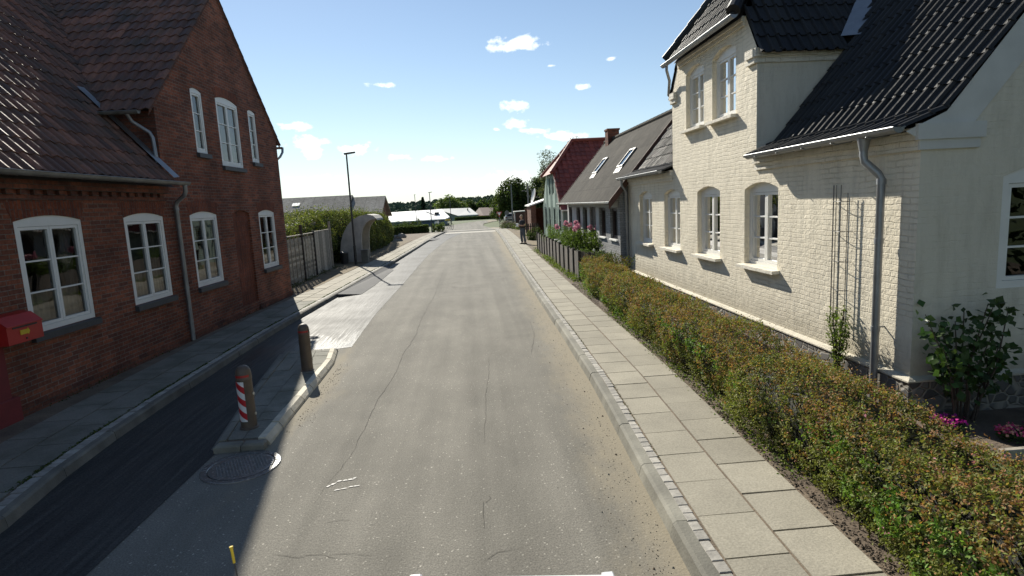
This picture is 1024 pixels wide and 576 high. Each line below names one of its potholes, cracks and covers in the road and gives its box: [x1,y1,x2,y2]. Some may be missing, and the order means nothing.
manhole cover [199,450,282,485]
